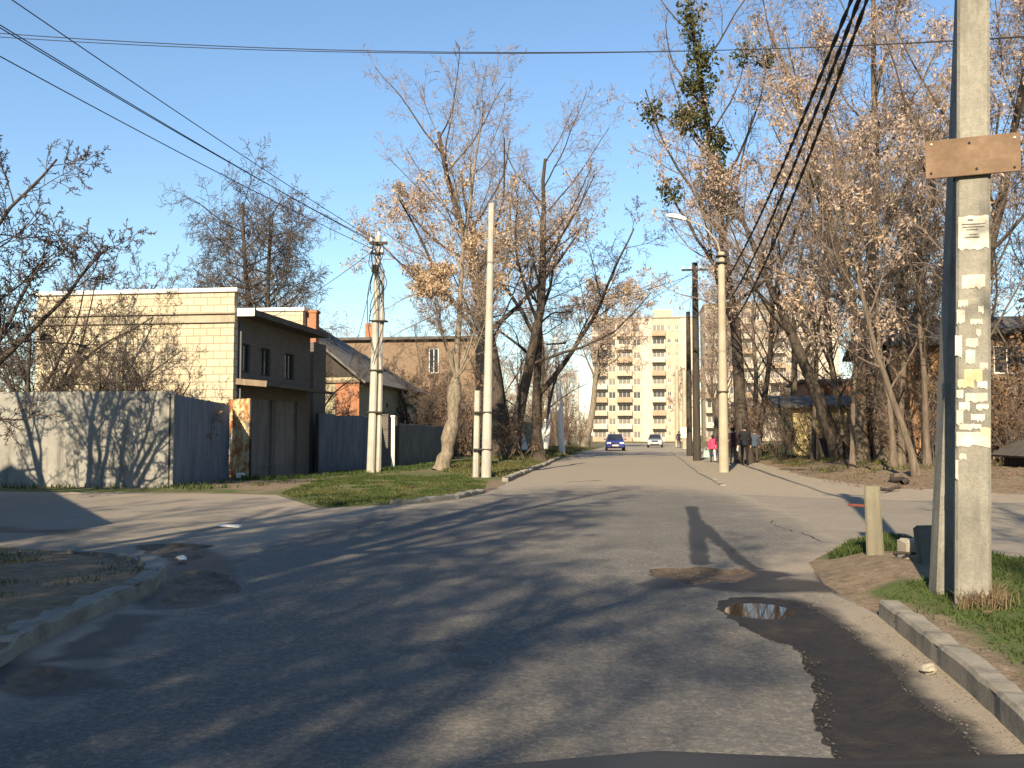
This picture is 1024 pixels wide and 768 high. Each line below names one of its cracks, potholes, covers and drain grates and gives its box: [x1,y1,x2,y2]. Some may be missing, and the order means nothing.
pothole [649,566,757,585]
pothole [717,597,986,759]
pothole [159,571,242,605]
pothole [134,544,216,561]
pothole [0,667,71,694]
